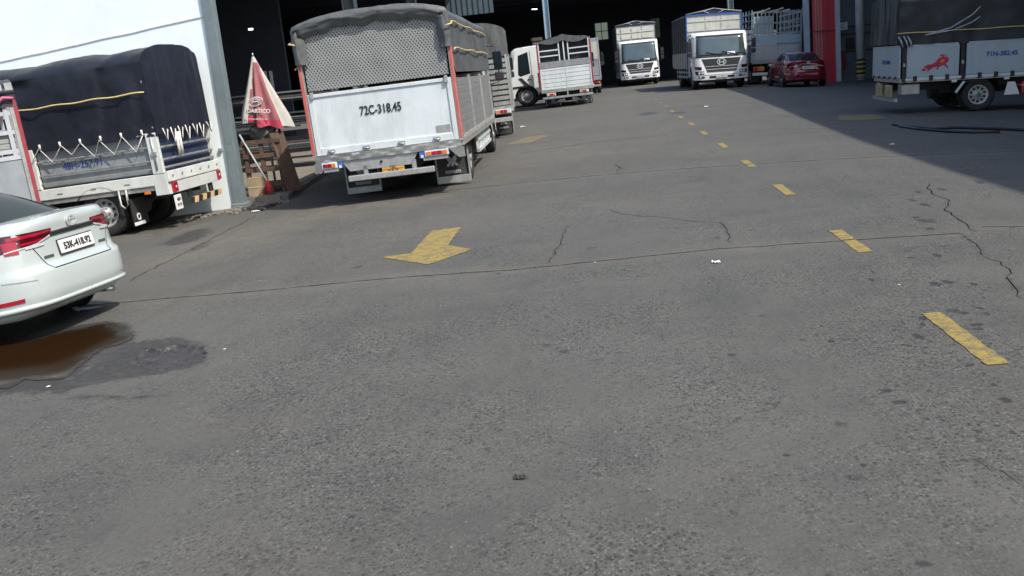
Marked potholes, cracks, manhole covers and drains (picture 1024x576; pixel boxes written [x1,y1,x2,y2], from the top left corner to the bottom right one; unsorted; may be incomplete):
crack [927,182,1023,299]
